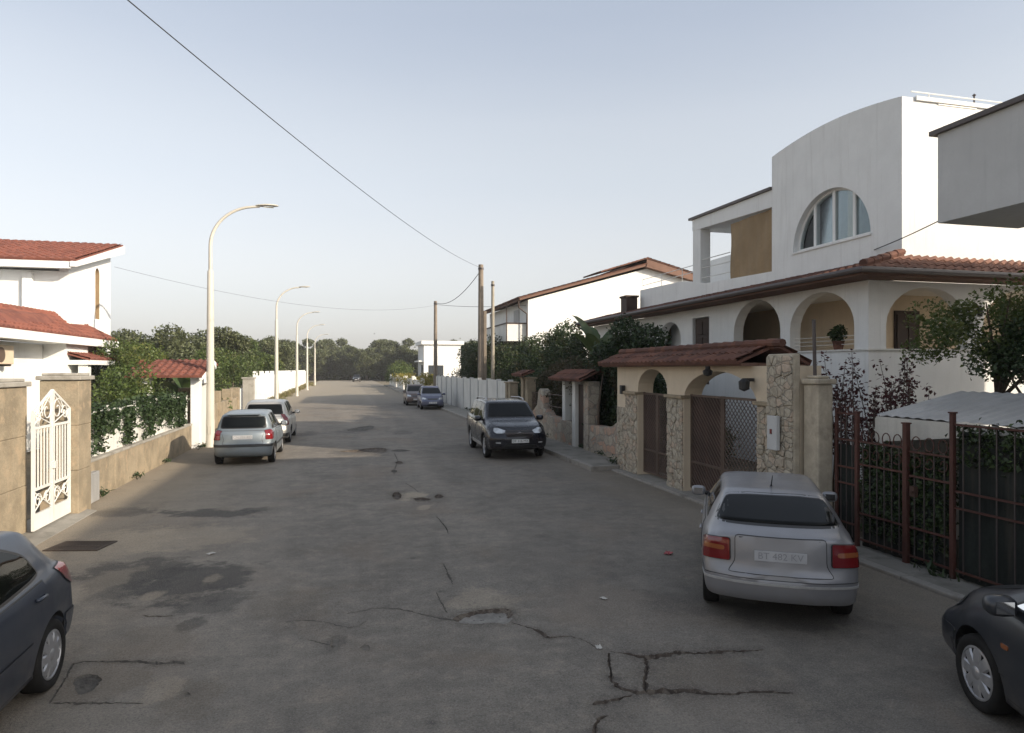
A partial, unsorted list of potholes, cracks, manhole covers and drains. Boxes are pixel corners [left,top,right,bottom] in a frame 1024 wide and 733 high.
pothole [452,608,513,624]
crack [511,622,791,733]
crack [288,453,453,645]
drain grate [42,541,118,551]
